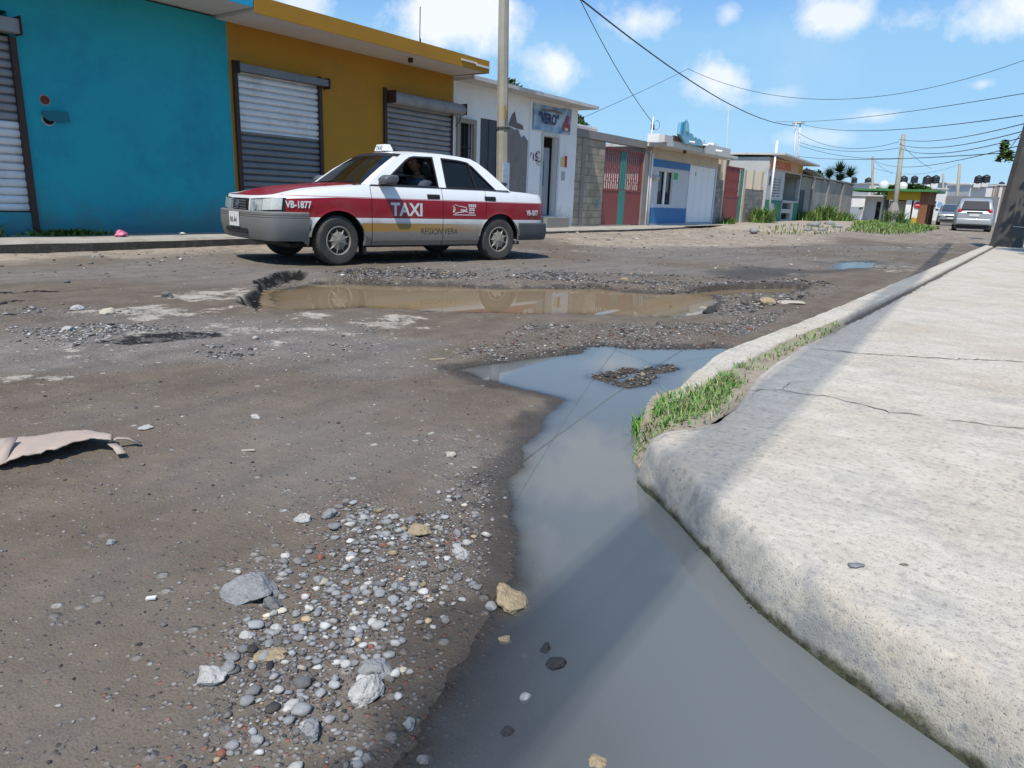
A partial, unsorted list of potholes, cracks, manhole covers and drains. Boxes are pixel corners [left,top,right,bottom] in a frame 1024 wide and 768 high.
pothole [220,268,838,324]
crack [750,381,919,415]
pothole [83,330,237,348]
